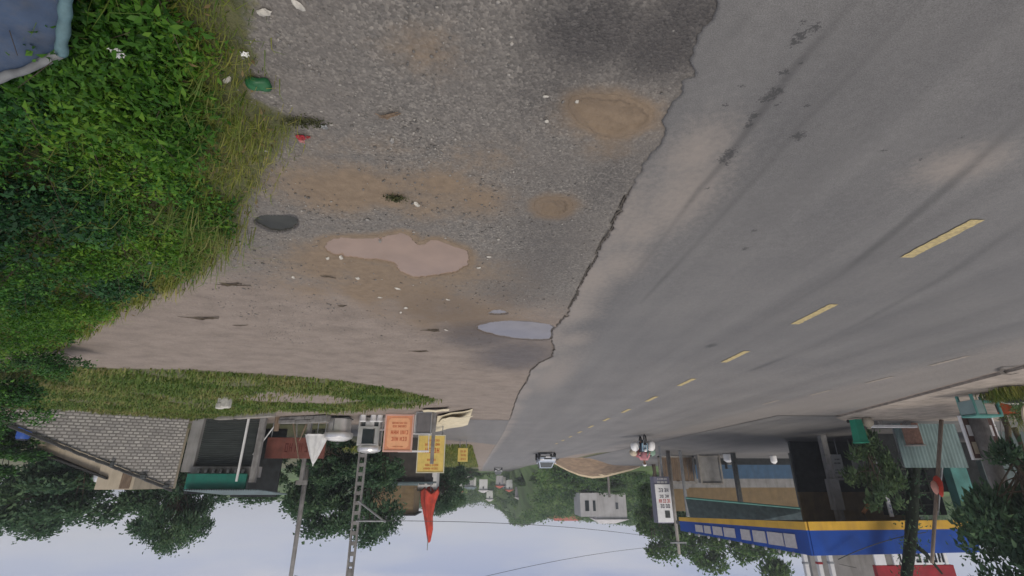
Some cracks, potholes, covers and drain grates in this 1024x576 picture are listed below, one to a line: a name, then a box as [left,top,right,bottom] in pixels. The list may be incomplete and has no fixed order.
pothole [249,212,304,234]
pothole [474,320,556,341]
crack [509,186,632,419]
